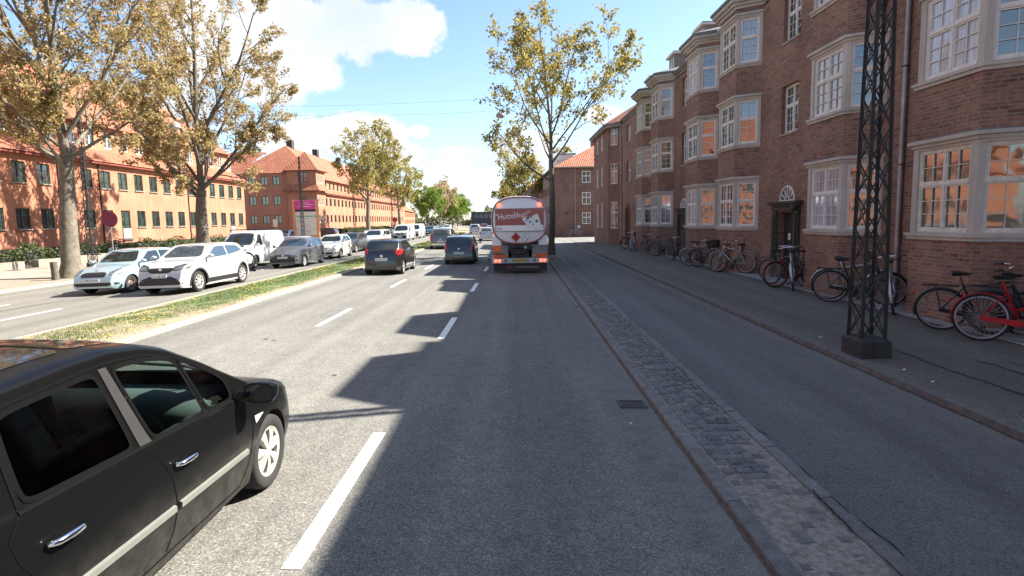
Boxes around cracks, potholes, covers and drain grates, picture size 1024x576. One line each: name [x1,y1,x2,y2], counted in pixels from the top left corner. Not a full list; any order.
crack [812,489,905,556]
